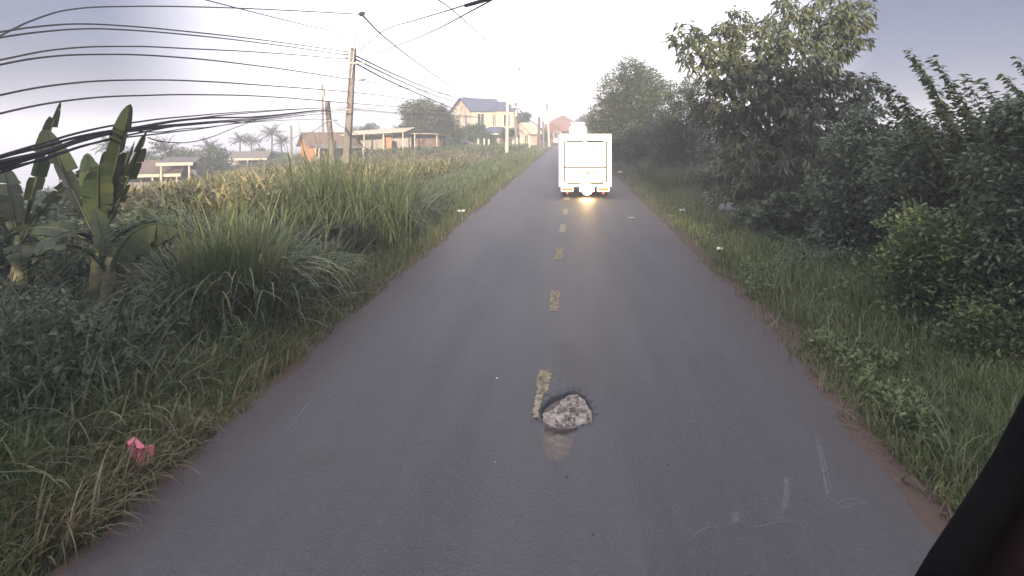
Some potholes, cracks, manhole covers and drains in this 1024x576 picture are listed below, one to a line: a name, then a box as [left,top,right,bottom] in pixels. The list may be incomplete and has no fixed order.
pothole [530,383,602,436]
